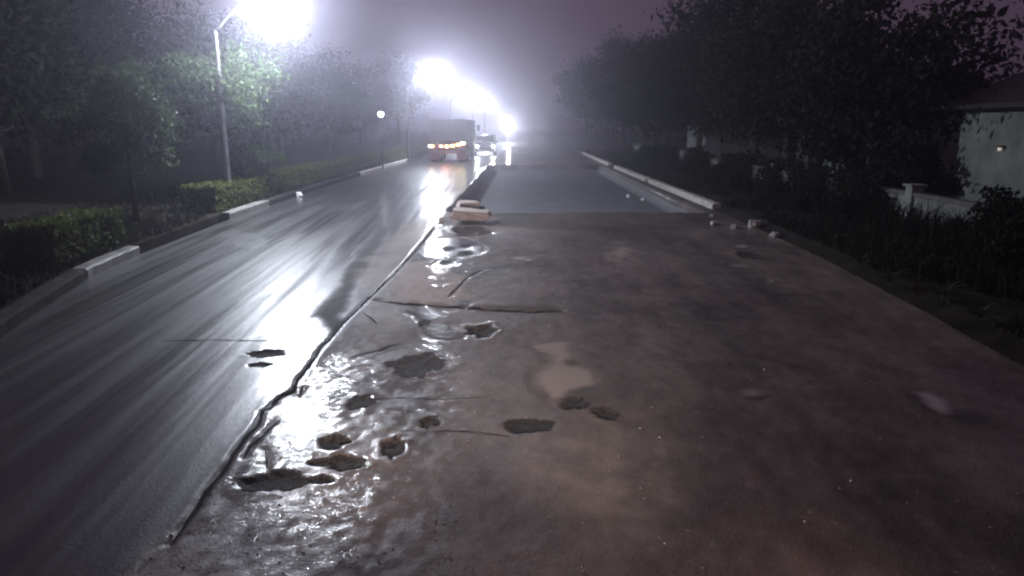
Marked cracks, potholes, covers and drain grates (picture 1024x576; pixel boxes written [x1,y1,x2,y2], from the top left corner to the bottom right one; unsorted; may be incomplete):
pothole [344,394,377,409]
pothole [328,454,366,471]
pothole [385,352,446,378]
pothole [307,474,335,484]
pothole [504,418,555,433]
pothole [380,435,405,459]
pothole [307,457,334,466]
pothole [419,416,441,427]
pothole [245,349,286,358]
pothole [318,434,347,450]
pothole [556,397,590,409]
pothole [590,406,620,420]
